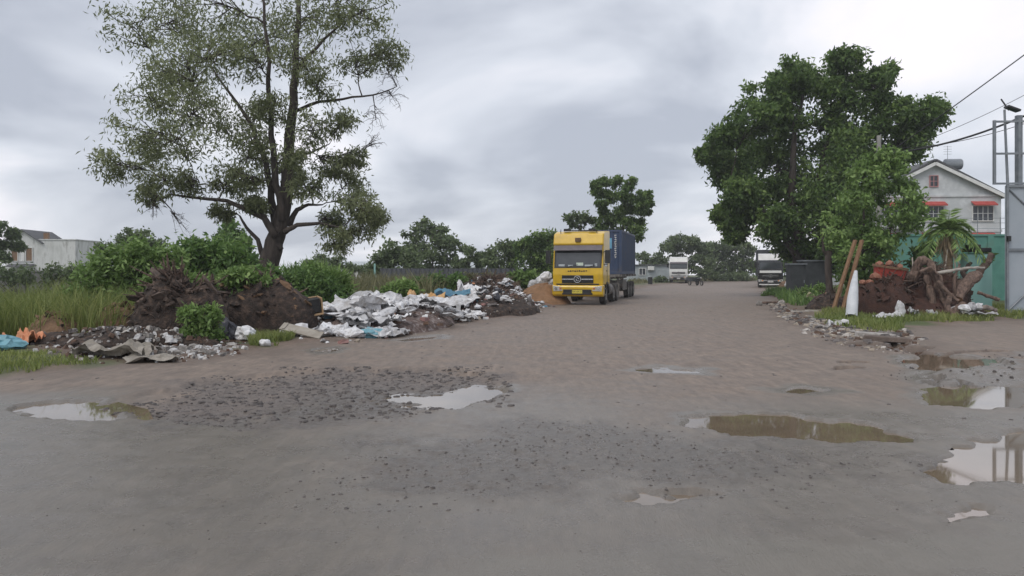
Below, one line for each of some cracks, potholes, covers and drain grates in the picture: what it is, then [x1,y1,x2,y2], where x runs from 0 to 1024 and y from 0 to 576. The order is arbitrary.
pothole [915,382,1024,410]
pothole [777,385,835,394]
pothole [632,365,712,374]
pothole [107,365,515,432]
pothole [918,426,1024,486]
pothole [1,397,128,421]
pothole [675,411,920,444]
pothole [601,481,735,507]
pothole [893,354,1017,369]
